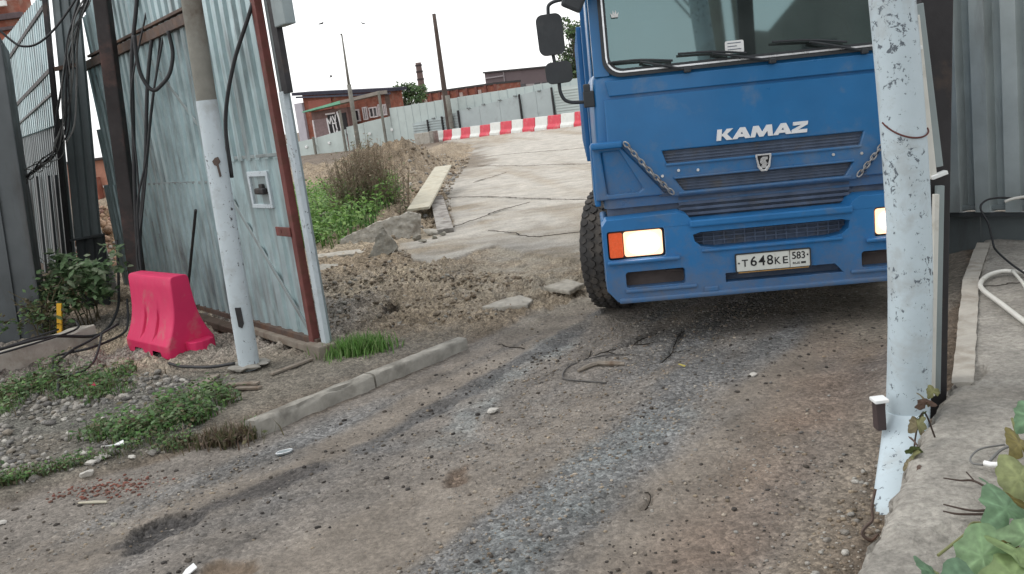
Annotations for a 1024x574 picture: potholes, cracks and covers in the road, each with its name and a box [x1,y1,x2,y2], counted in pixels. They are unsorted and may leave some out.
crack [449,164,587,237]
pothole [120,510,205,557]
pothole [442,467,472,489]
